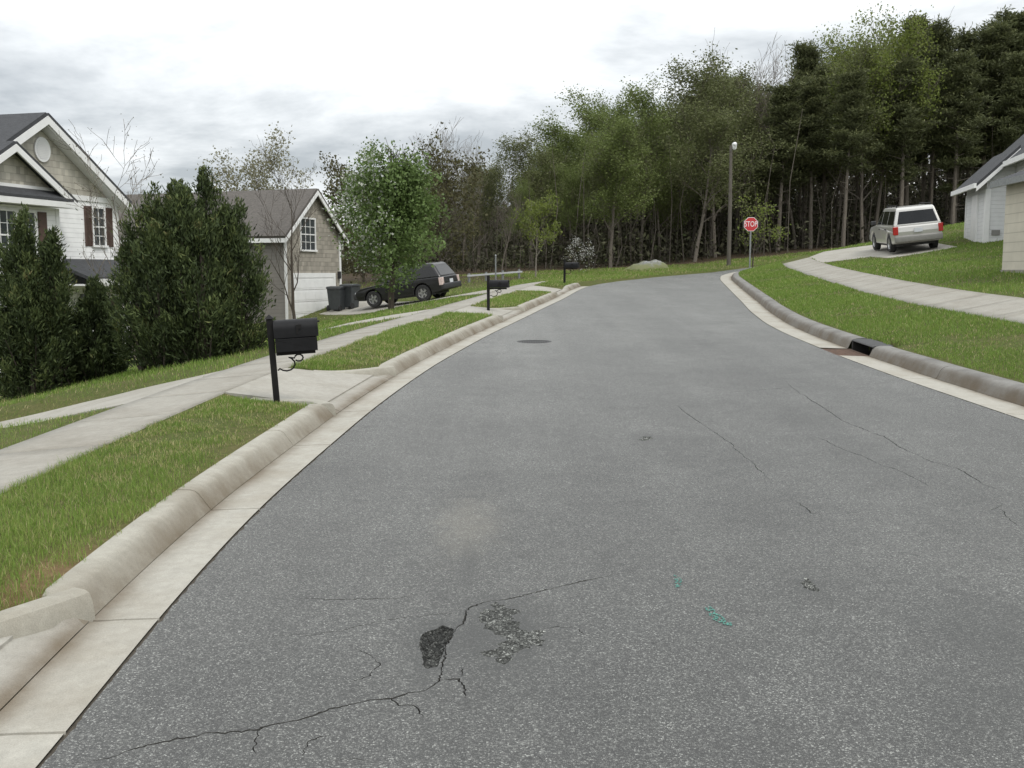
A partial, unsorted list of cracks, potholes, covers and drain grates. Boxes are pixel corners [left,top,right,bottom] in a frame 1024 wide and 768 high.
pothole [419,625,454,669]
drain grate [823,339,894,367]
crack [53,572,631,766]
pothole [800,577,821,592]
pothole [477,602,546,665]
crack [736,383,1023,498]
